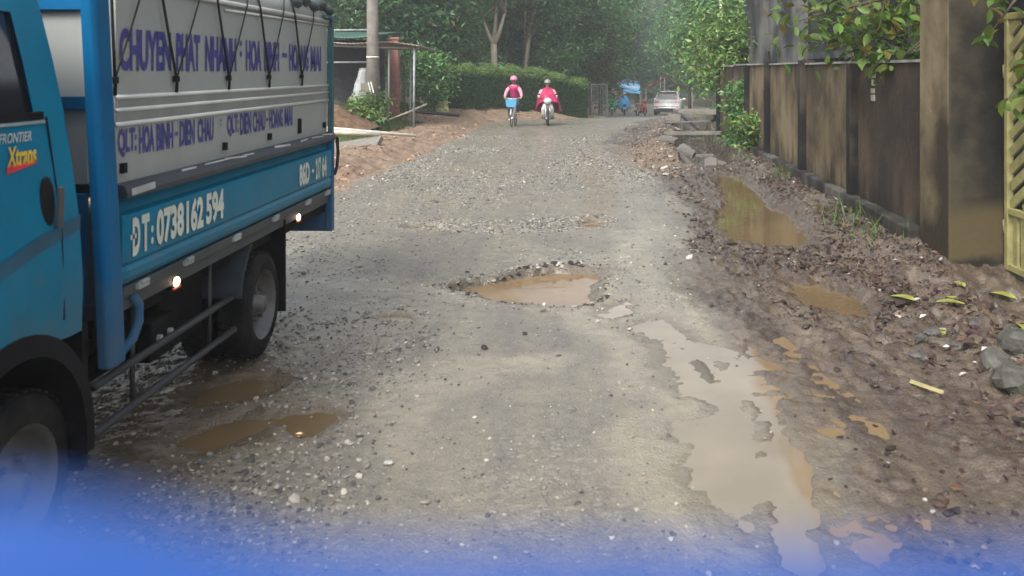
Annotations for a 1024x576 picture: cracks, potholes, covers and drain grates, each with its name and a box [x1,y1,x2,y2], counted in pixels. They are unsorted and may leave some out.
pothole [430,260,633,313]
